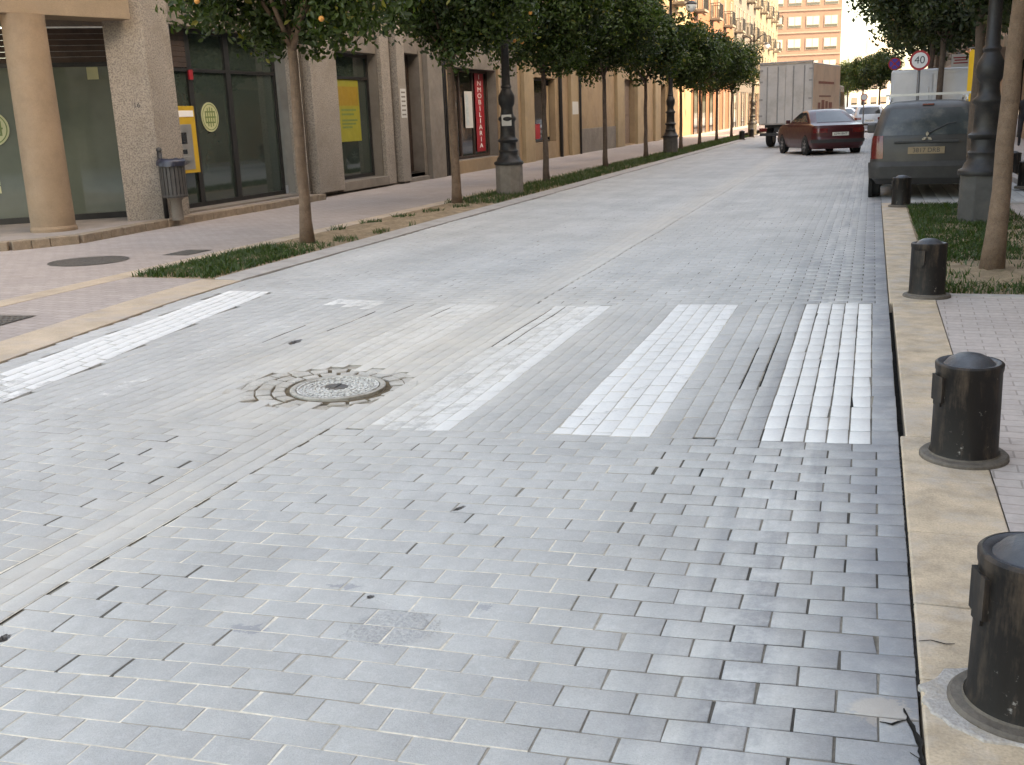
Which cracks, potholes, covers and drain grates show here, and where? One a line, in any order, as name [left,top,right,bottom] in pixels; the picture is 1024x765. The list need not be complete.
manhole cover [290,375,386,402]
manhole cover [47,256,129,266]
